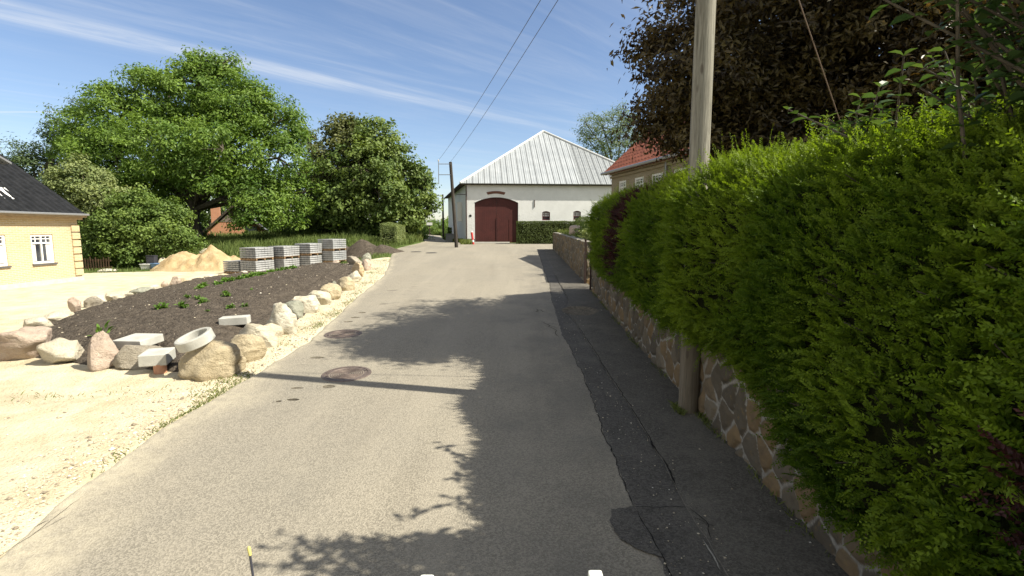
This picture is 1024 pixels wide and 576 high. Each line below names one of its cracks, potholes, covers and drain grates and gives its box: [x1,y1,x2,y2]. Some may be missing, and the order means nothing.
manhole cover [324,329,362,339]
manhole cover [321,366,372,382]
crack [635,506,720,576]
